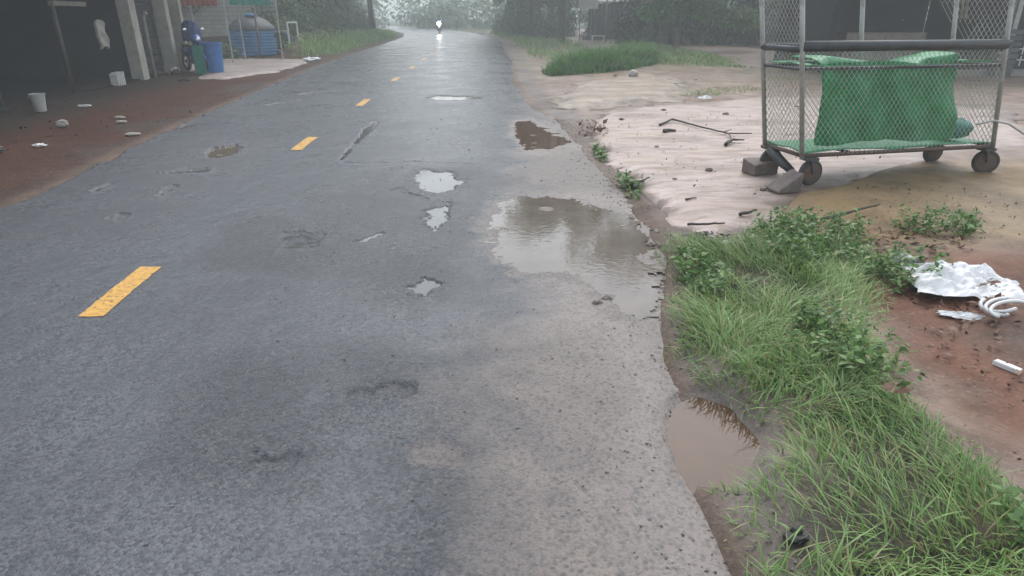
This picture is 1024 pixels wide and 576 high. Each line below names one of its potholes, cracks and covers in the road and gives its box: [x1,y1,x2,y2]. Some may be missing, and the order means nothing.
pothole [98,210,136,224]
pothole [142,166,217,175]
pothole [328,376,429,408]
pothole [397,271,458,300]
pothole [348,229,391,244]
pothole [412,199,465,233]
pothole [146,183,187,199]
pothole [502,118,579,152]
pothole [264,226,344,255]
pothole [195,142,251,160]
